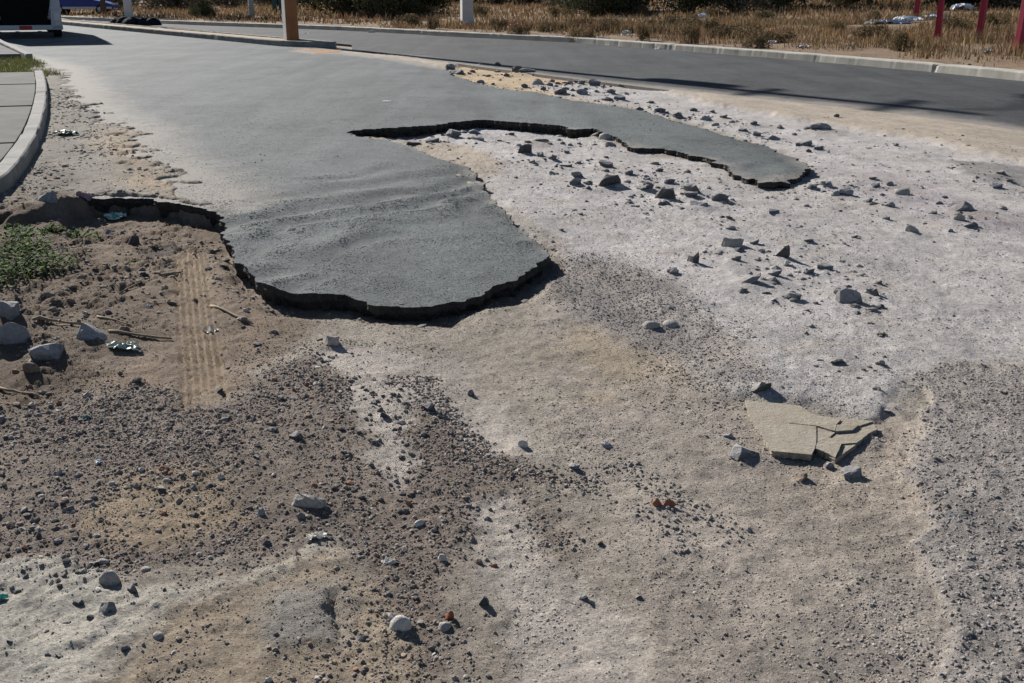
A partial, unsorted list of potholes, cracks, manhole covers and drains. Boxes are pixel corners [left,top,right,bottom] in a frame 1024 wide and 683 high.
pothole [347,120,626,166]
pothole [445,65,663,115]
